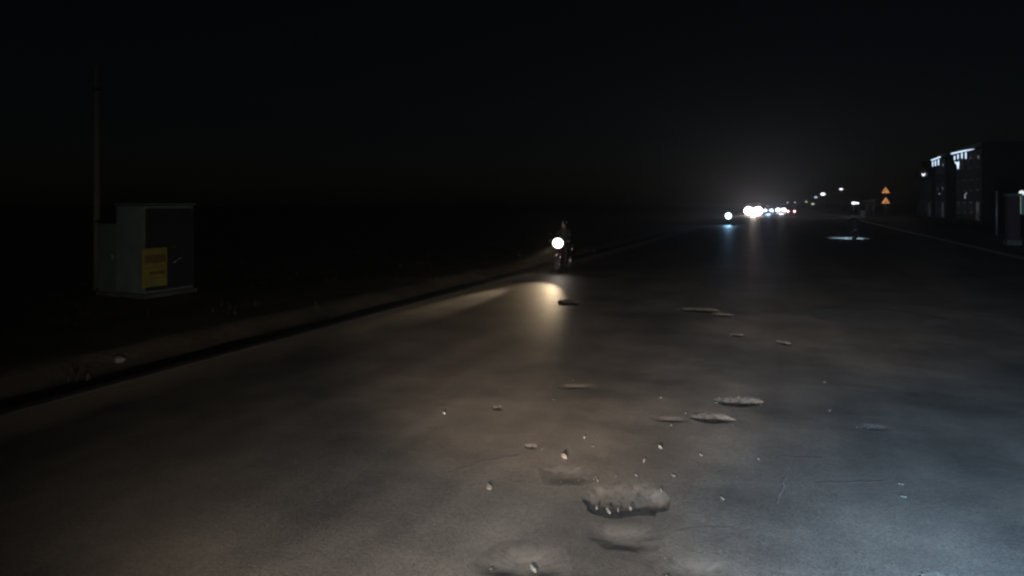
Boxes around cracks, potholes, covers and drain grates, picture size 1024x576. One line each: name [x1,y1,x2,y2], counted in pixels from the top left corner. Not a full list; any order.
pothole [713,395,765,407]
pothole [650,415,692,423]
pothole [856,423,895,431]
pothole [577,475,671,519]
pothole [537,464,597,486]
pothole [471,539,572,576]
pothole [581,522,672,555]
crack [447,454,520,473]
pothole [685,411,736,425]
crack [776,455,808,504]
